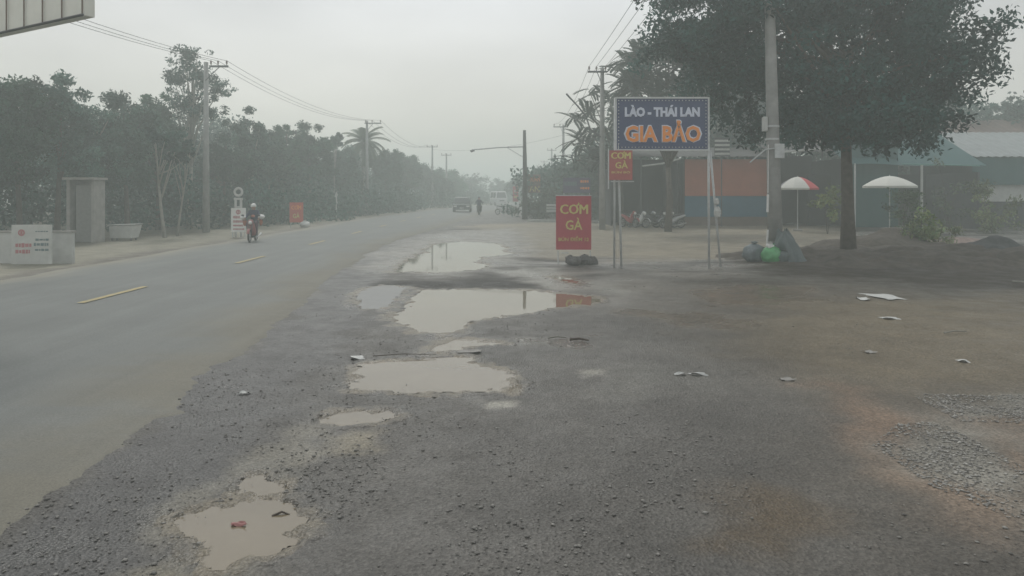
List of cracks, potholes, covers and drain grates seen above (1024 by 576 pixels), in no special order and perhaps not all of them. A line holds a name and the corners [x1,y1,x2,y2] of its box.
pothole [375,287,611,338]
pothole [374,241,526,275]
pothole [299,404,413,431]
pothole [153,468,335,576]
pothole [339,284,421,315]
pothole [330,351,535,398]
pothole [407,334,516,359]
